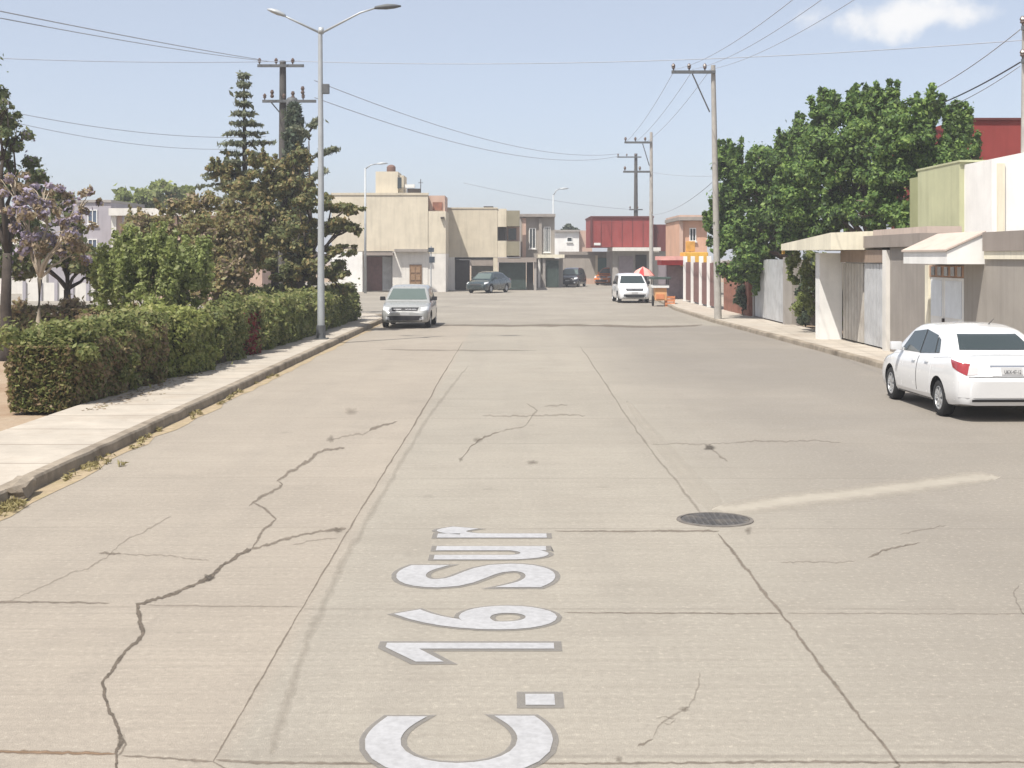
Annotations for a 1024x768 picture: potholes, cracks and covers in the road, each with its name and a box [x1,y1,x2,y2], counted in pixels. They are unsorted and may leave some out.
crack [870,543,917,557]
manhole cover [677,512,754,527]
crack [101,447,346,768]
